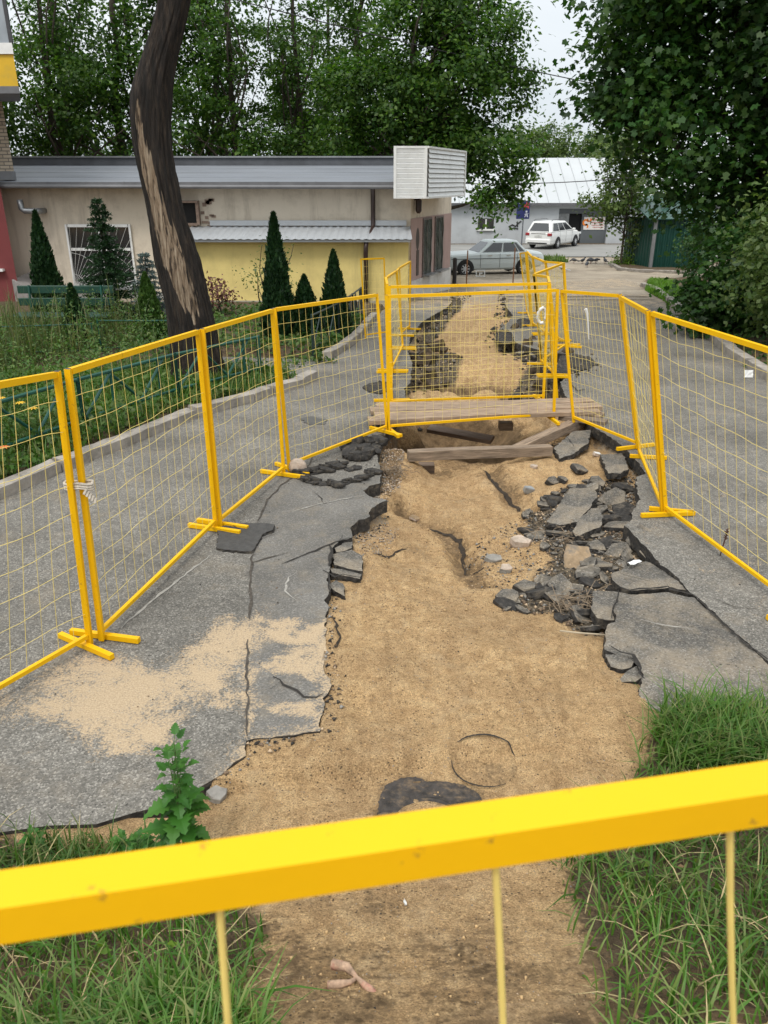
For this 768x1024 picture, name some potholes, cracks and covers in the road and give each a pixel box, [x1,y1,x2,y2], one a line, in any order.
manhole cover [451,733,517,787]
crack [270,676,322,697]
crack [251,534,363,591]
pothole [296,476,373,486]
crack [611,572,768,659]
crack [332,617,341,648]
